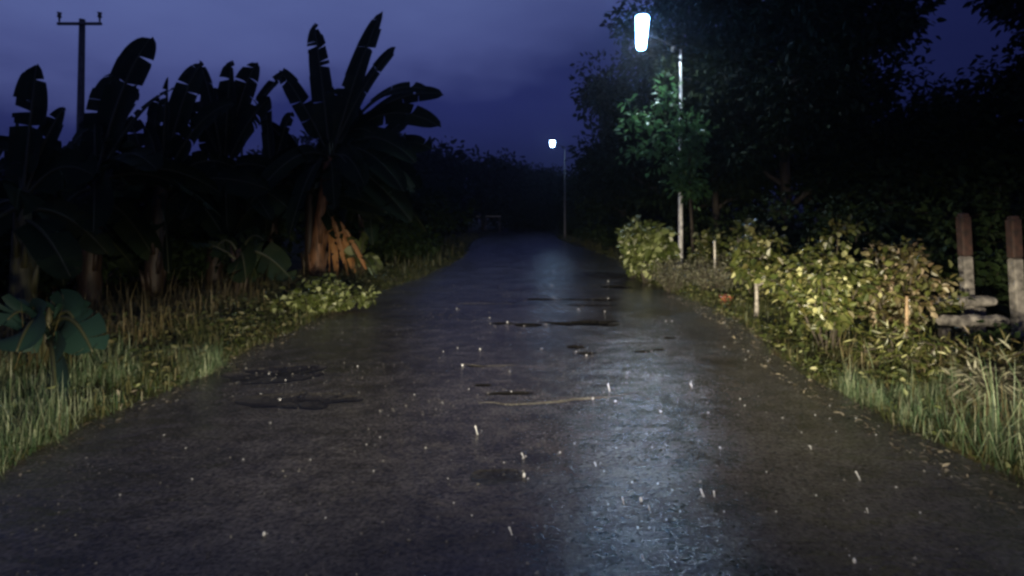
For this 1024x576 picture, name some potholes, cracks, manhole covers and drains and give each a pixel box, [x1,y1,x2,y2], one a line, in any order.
pothole [221,364,328,385]
pothole [230,392,363,410]
pothole [469,469,523,485]
crack [480,392,636,406]
